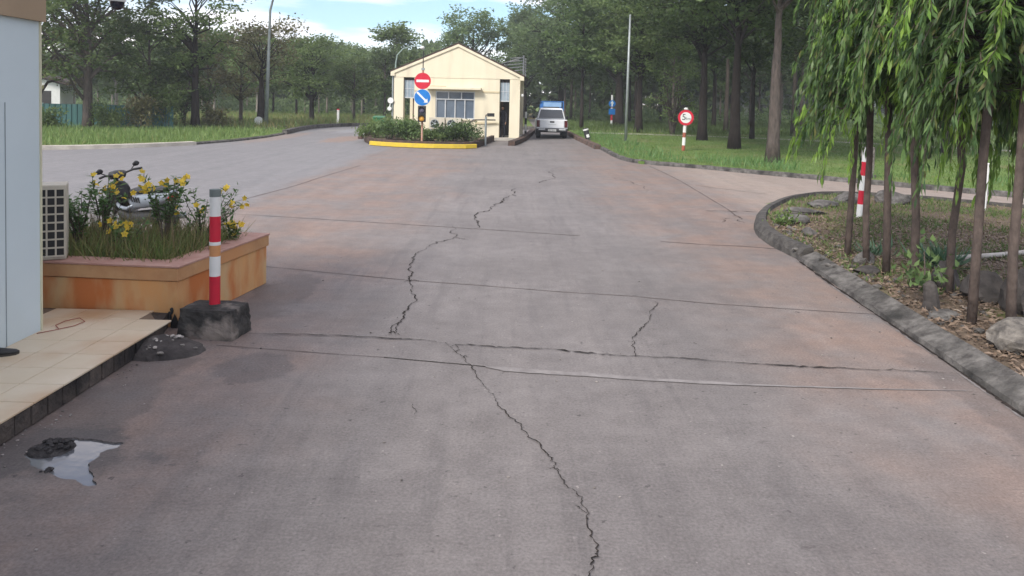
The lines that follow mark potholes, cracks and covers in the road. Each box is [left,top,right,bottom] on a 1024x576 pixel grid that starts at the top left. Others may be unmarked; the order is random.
crack [253,189,953,576]
pothole [24,437,123,486]
